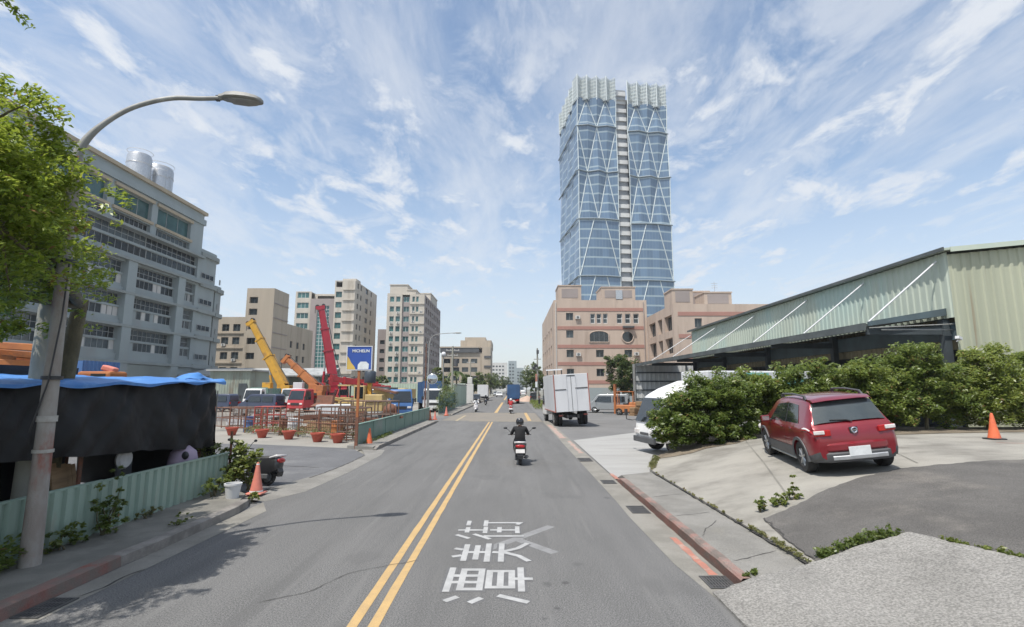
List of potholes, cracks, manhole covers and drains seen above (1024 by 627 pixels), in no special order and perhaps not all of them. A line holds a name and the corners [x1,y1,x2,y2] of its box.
drain grate [9,597,79,619]
crack [734,518,815,561]
drain grate [699,576,734,589]
